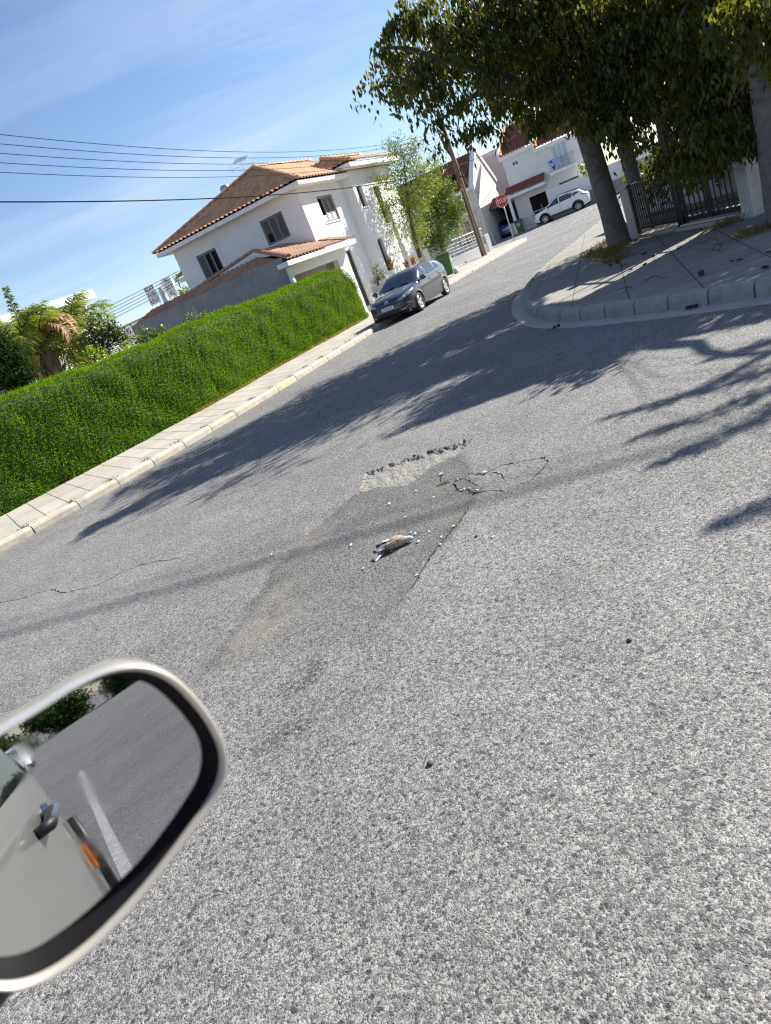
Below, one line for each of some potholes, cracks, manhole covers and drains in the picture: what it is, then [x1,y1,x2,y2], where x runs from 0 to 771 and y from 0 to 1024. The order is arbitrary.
crack [0,552,201,603]
pothole [357,439,472,495]
crack [407,456,549,592]
